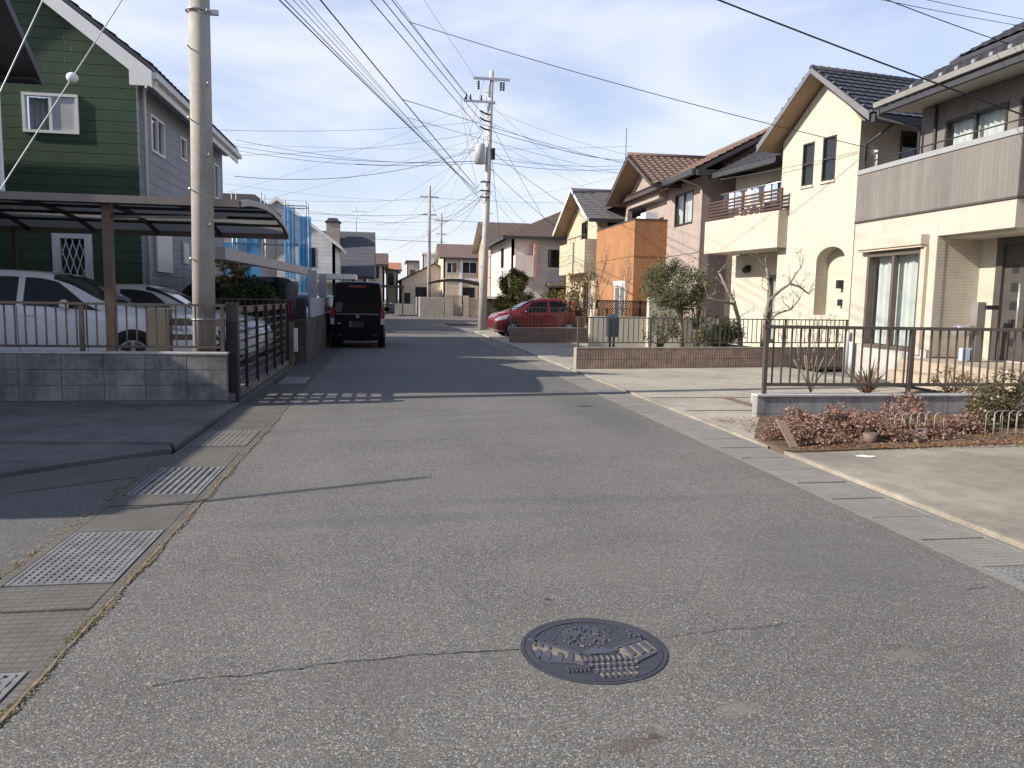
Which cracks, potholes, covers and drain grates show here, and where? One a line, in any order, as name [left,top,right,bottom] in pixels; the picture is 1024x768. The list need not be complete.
drain grate [190,430,260,447]
crack [124,648,519,690]
drain grate [0,671,28,704]
drain grate [125,466,226,496]
manhole cover [520,618,668,685]
drain grate [4,530,164,588]
